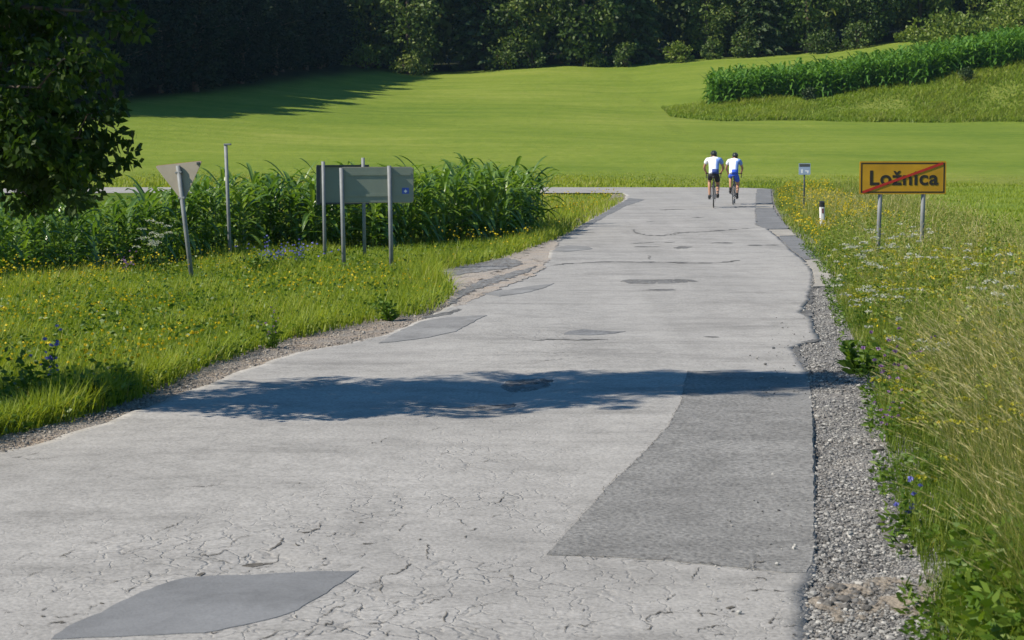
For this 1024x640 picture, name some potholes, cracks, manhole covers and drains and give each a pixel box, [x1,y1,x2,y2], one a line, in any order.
crack [644,566,701,630]
crack [196,512,443,639]
crack [551,209,761,266]
crack [59,521,197,557]
crack [697,560,798,636]
